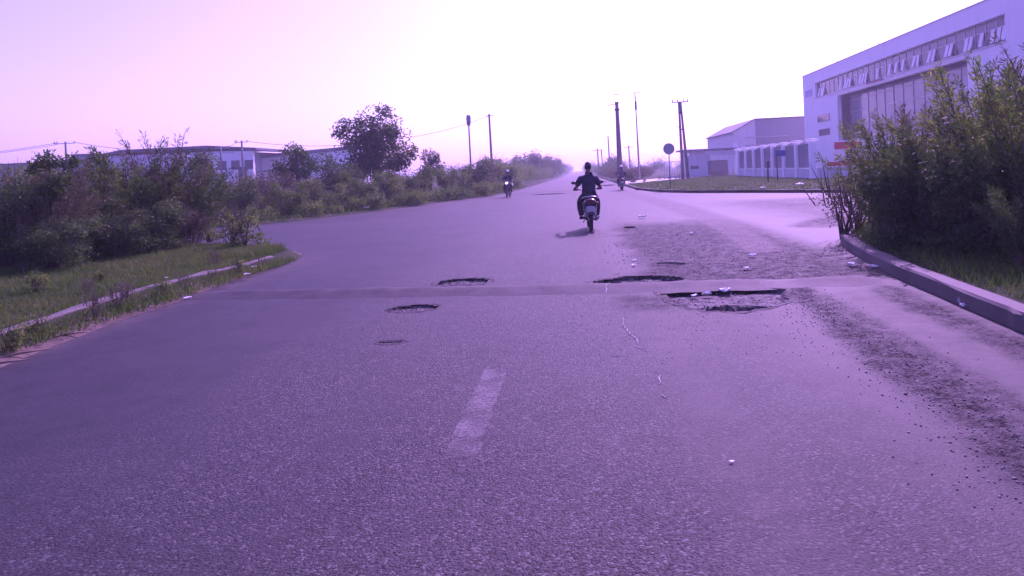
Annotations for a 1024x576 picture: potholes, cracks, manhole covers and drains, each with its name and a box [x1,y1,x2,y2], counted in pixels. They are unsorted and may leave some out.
pothole [653,288,796,314]
pothole [584,274,690,283]
pothole [431,277,495,286]
pothole [384,304,442,313]
